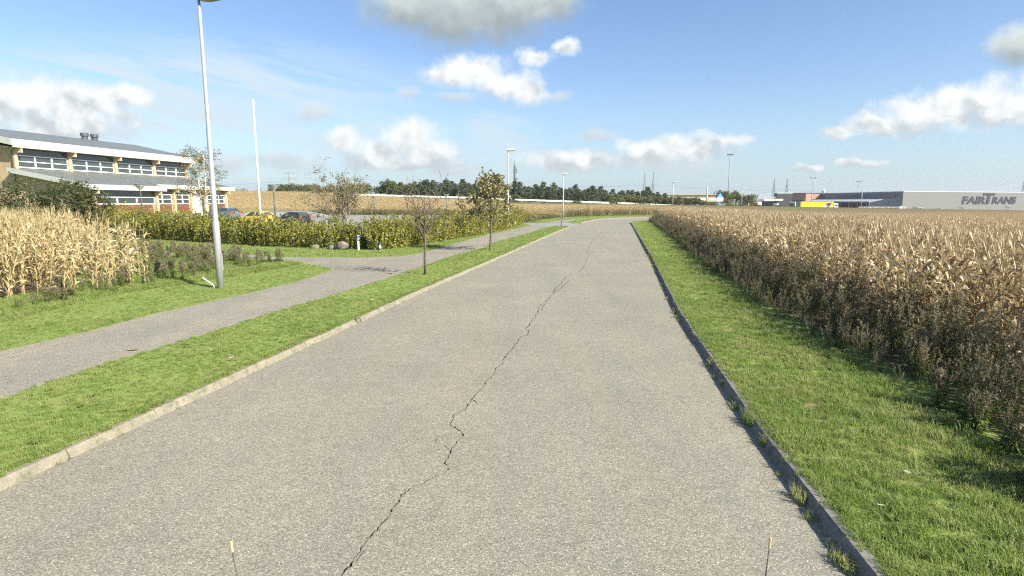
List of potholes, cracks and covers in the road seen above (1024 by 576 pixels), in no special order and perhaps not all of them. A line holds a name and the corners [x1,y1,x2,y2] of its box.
crack [341,241,593,576]
